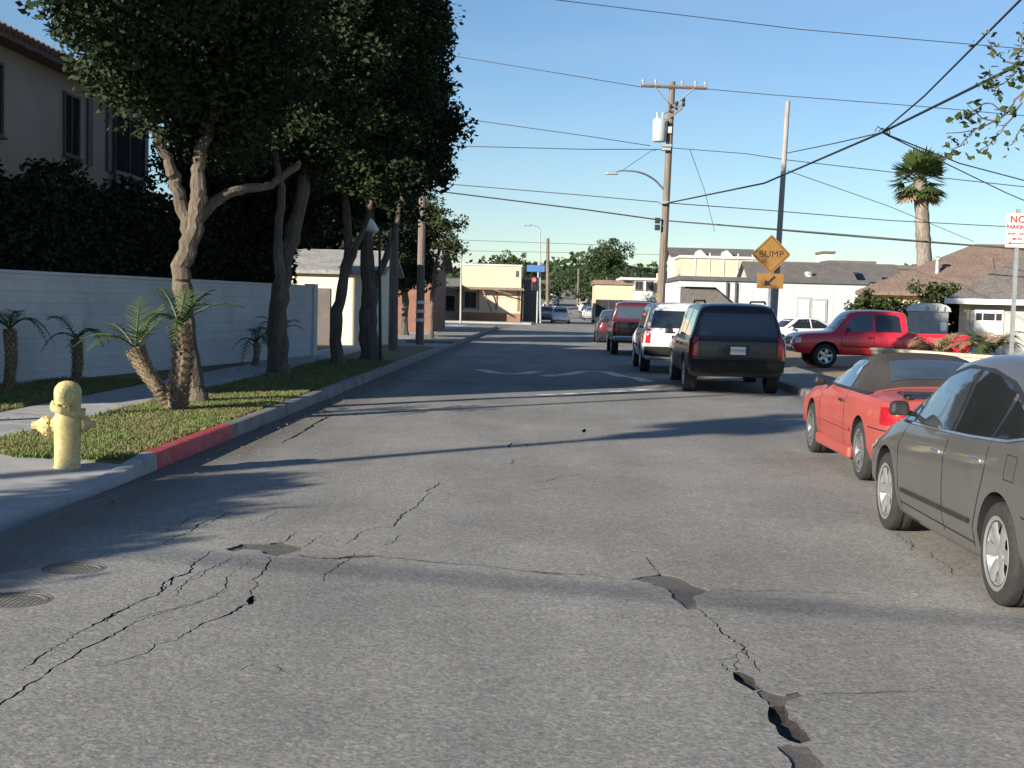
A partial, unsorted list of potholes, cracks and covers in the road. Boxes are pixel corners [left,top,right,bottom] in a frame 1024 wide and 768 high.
pothole [768,706,811,744]
manhole cover [0,592,54,608]
pothole [632,574,709,609]
pothole [733,672,761,691]
crack [646,557,760,672]
manhole cover [40,562,107,575]
pothole [777,744,824,768]
crack [0,477,615,705]
pothole [757,690,805,707]
pothole [227,542,305,556]
